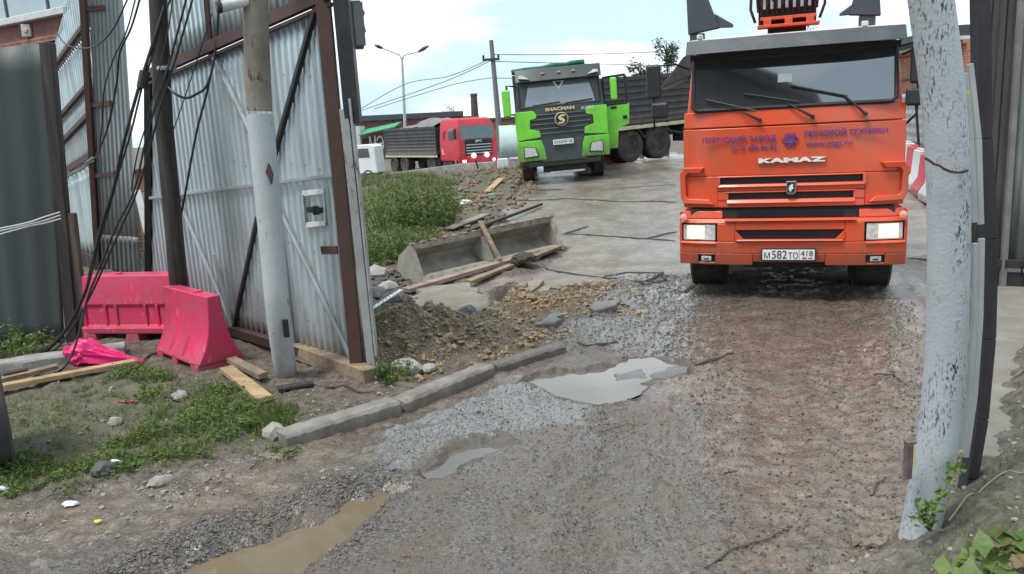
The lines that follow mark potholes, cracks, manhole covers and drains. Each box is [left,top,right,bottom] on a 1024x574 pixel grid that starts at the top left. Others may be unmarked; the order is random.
pothole [516,355,697,406]
pothole [410,430,523,483]
